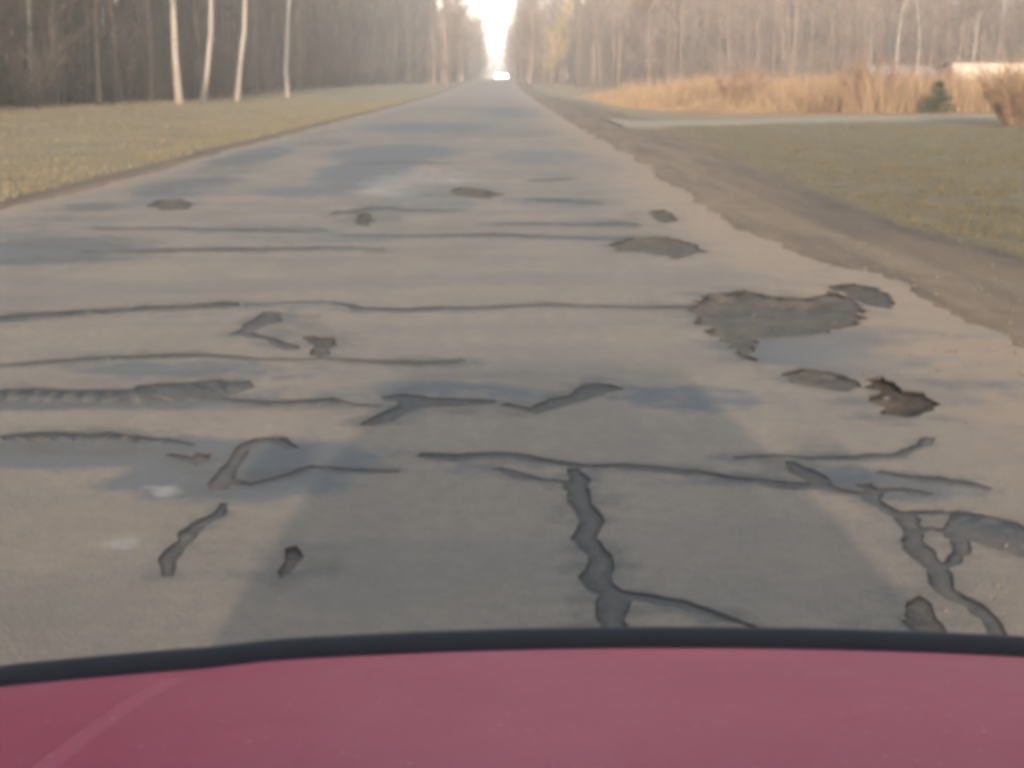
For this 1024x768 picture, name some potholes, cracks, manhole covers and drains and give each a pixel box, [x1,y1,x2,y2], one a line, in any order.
pothole [448,188,506,199]
pothole [277,545,304,579]
pothole [353,212,377,226]
crack [417,437,1024,635]
pothole [685,289,871,362]
pothole [781,368,862,392]
crack [0,301,699,577]
pothole [302,335,338,359]
pothole [609,237,707,259]
pothole [862,376,941,418]
pothole [648,209,680,223]
pothole [823,282,896,309]
